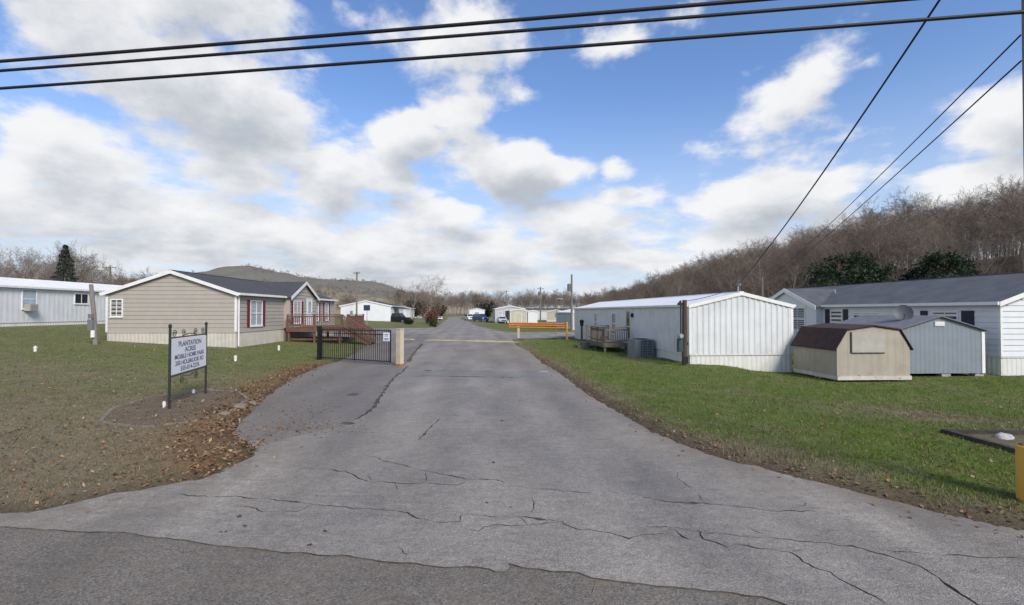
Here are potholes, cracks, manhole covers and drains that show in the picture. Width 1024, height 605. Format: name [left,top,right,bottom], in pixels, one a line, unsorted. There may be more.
crack [165,474,1018,605]
crack [298,456,504,489]
